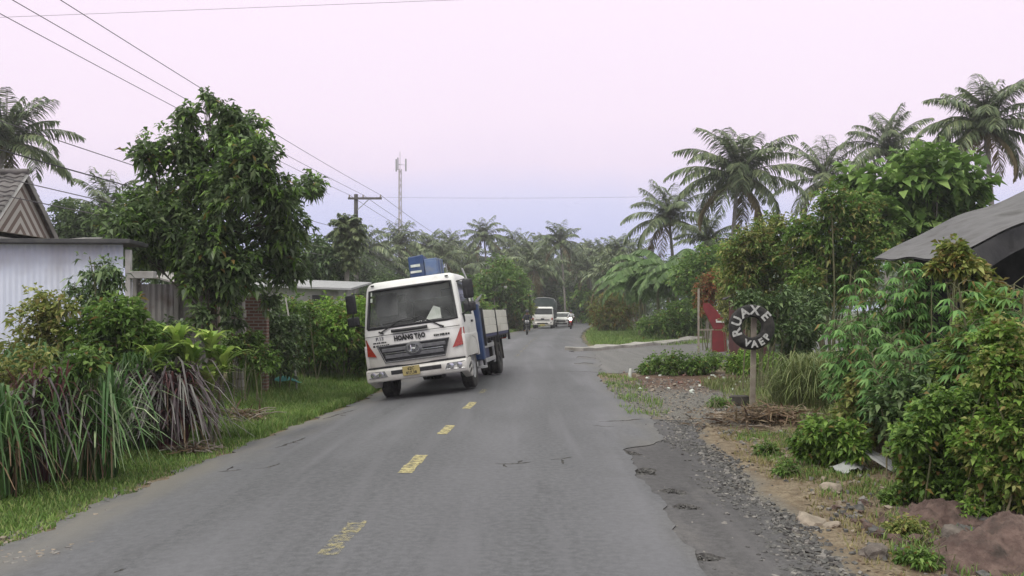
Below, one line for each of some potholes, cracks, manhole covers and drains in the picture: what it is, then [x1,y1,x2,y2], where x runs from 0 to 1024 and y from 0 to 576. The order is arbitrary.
pothole [695,553,726,561]
pothole [636,467,657,475]
crack [257,438,304,469]
